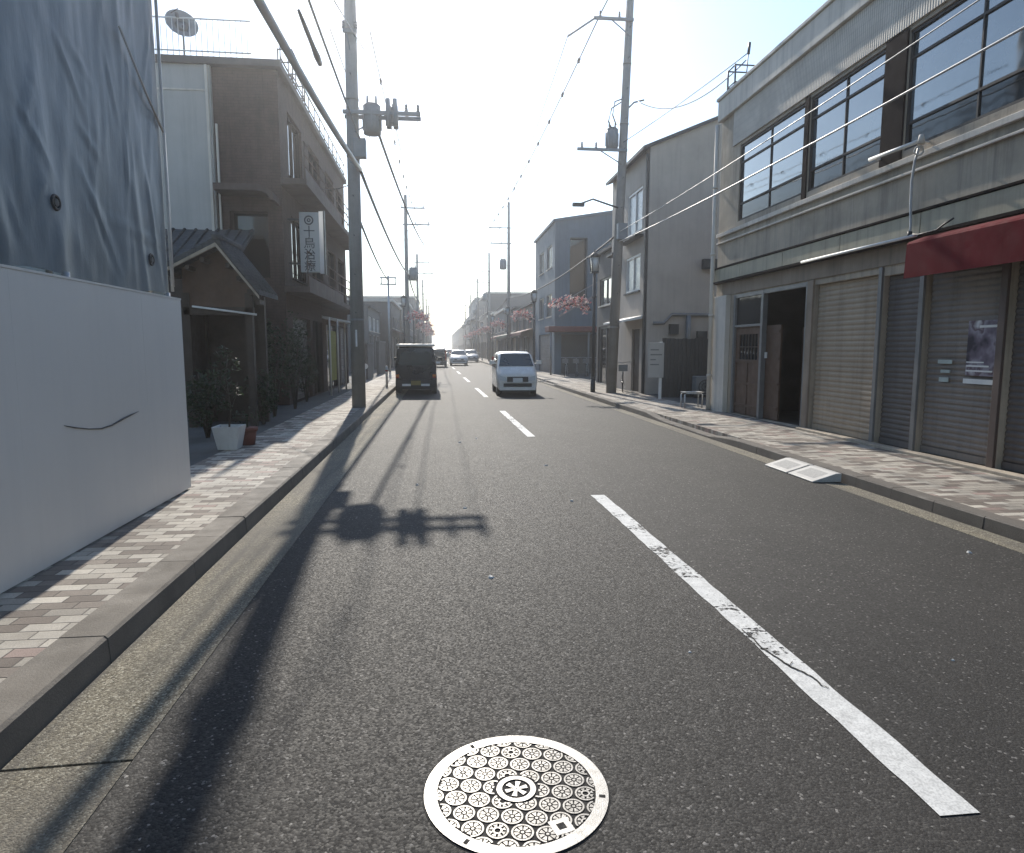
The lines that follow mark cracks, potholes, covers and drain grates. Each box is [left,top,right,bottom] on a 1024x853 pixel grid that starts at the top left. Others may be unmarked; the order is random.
manhole cover [422,736,611,853]
crack [742,629,829,688]
